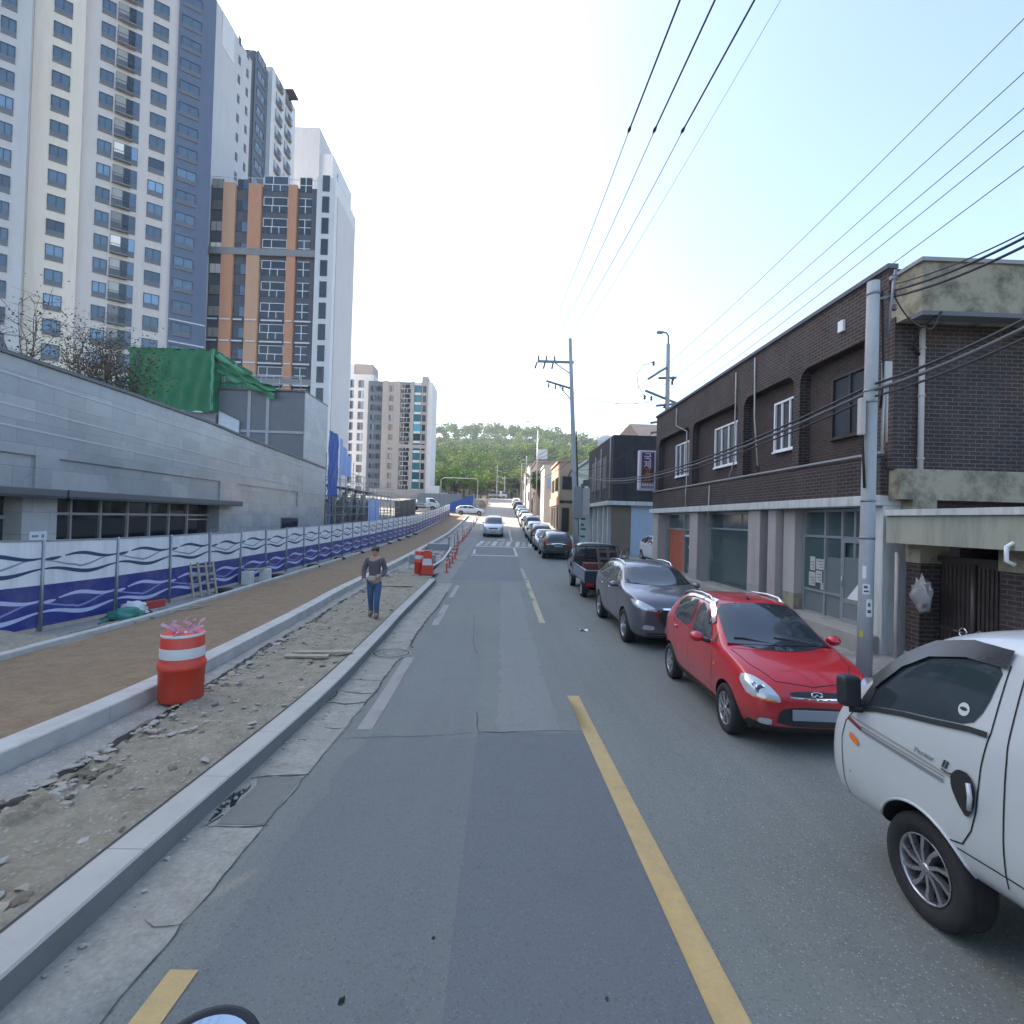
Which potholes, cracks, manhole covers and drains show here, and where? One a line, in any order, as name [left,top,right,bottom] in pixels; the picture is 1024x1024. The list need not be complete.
crack [201,774,309,827]
pothole [208,789,247,822]
manhole cover [371,648,412,658]
